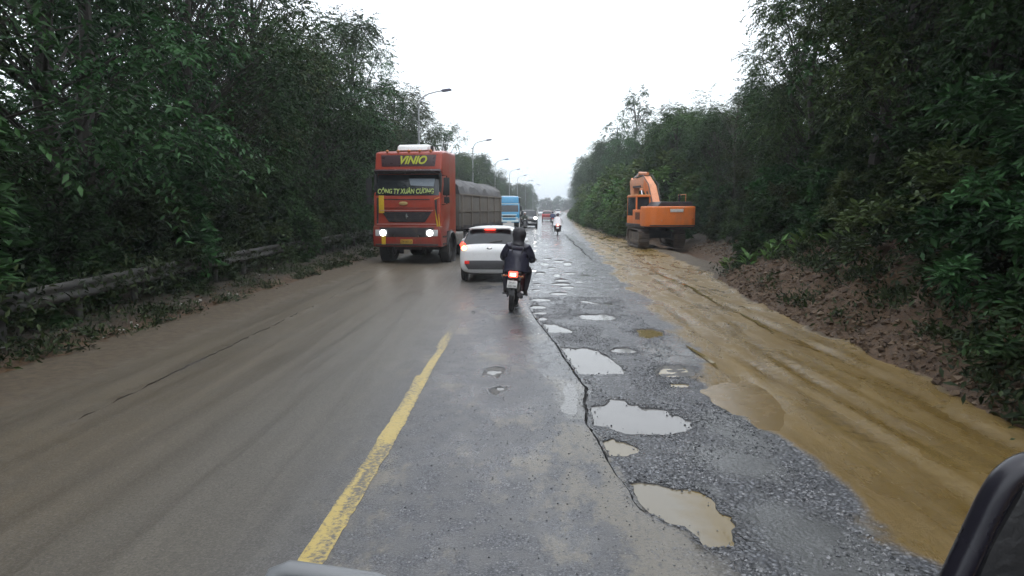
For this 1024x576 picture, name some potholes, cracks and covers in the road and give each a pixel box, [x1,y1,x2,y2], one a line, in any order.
pothole [542,323,572,333]
pothole [602,437,640,456]
pothole [481,366,505,378]
pothole [629,481,736,547]
pothole [590,399,692,435]
pothole [636,328,665,338]
pothole [654,364,696,377]
pothole [561,347,626,375]
